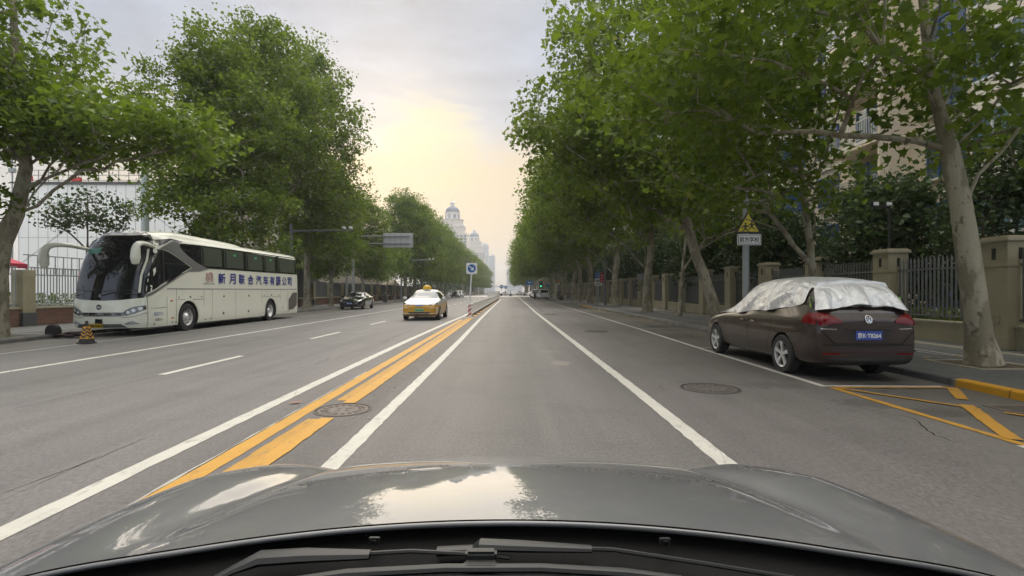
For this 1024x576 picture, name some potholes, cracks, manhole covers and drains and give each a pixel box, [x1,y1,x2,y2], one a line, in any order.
manhole cover [679,383,742,394]
manhole cover [313,403,372,417]
crack [1,436,149,501]
